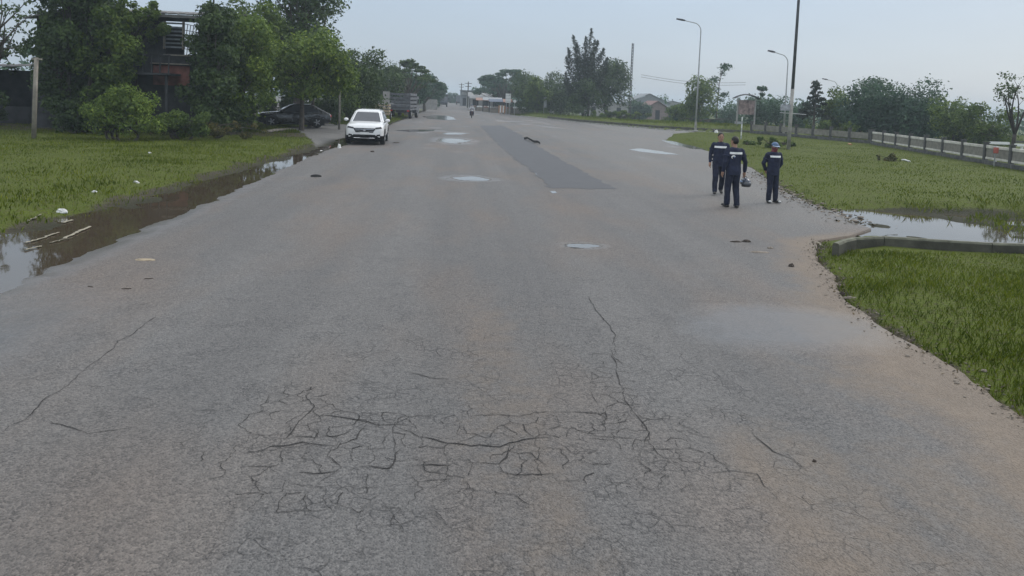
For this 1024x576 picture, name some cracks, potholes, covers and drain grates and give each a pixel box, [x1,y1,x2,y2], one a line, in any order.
crack [5,317,159,470]
crack [518,296,770,491]
crack [180,386,569,526]
